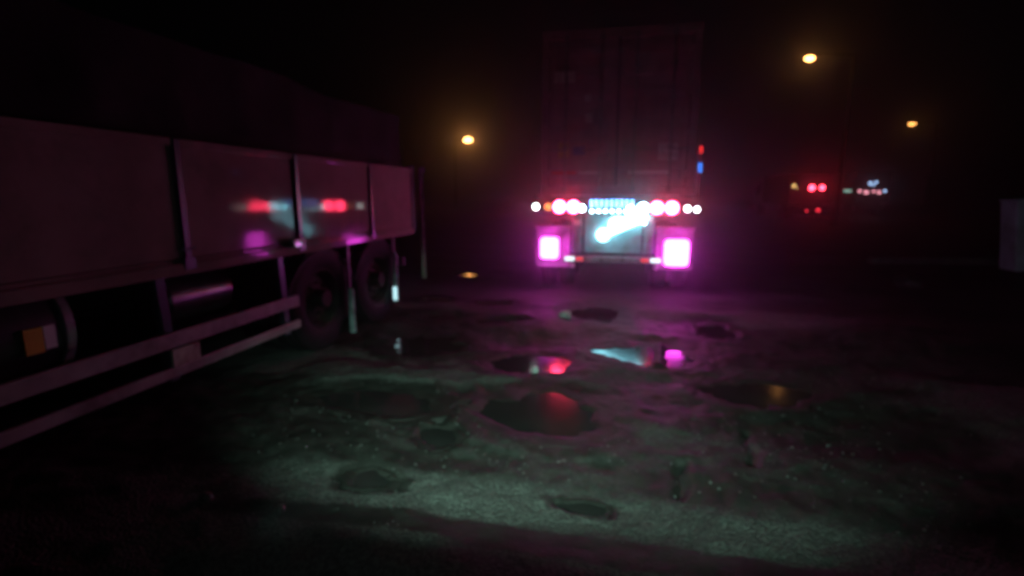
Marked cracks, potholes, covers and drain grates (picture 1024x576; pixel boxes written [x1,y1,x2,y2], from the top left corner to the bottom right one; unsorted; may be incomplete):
pothole [567,304,625,324]
pothole [478,350,585,374]
pothole [684,321,740,340]
pothole [579,343,711,371]
pothole [339,465,404,493]
pothole [464,386,617,448]
pothole [683,379,827,411]
pothole [413,424,466,452]
pothole [552,499,612,519]
